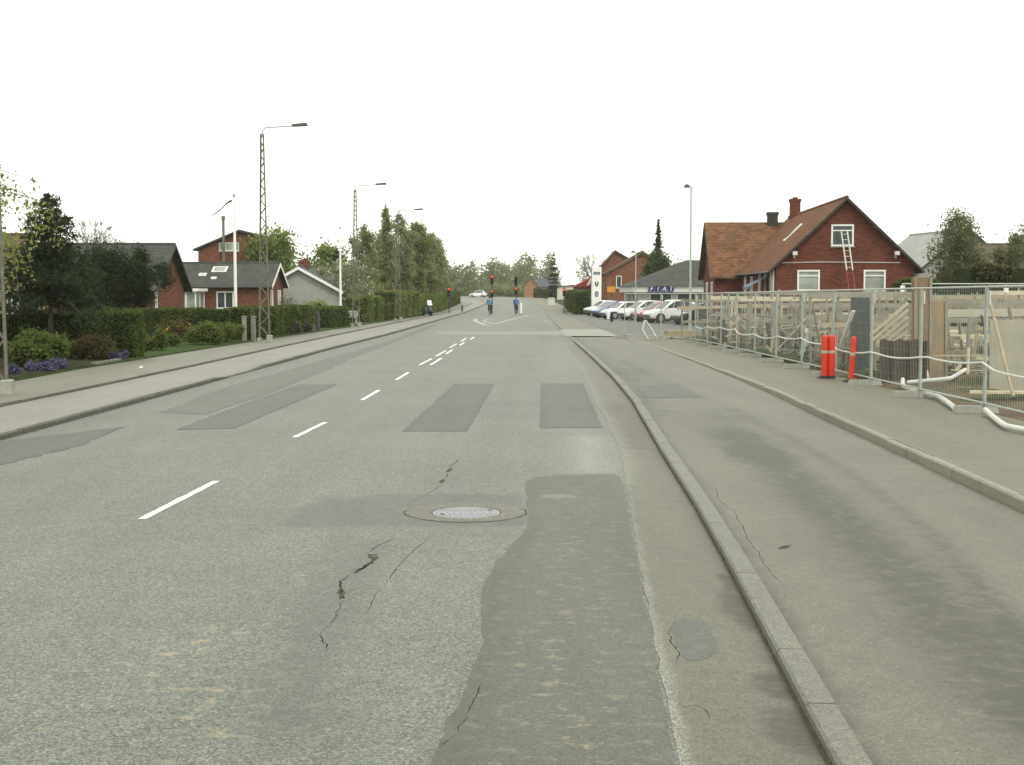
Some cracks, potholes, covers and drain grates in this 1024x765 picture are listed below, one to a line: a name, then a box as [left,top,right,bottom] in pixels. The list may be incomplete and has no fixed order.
crack [403,460,527,523]
crack [320,538,428,650]
crack [713,483,786,597]
manhole cover [428,506,504,518]
